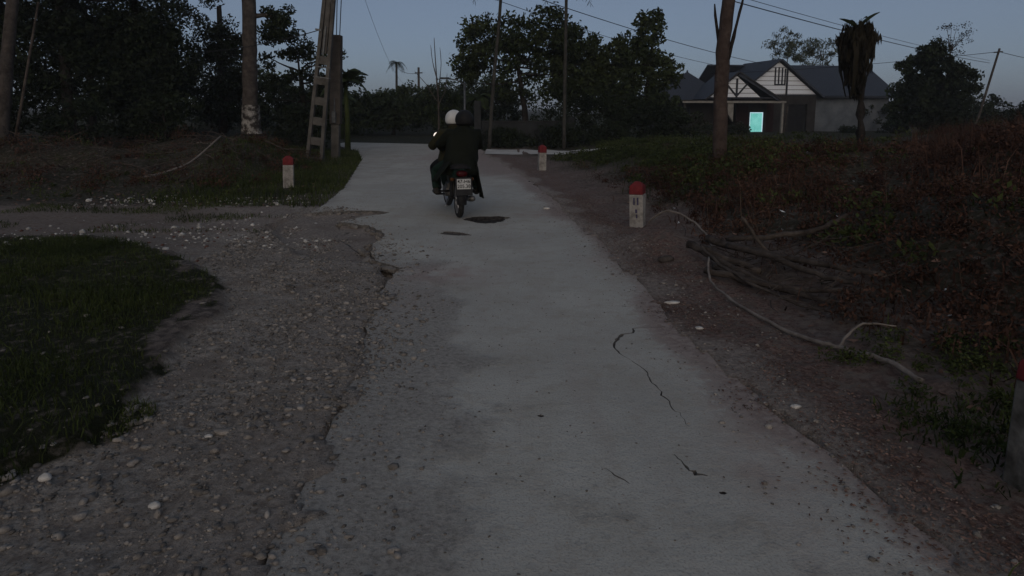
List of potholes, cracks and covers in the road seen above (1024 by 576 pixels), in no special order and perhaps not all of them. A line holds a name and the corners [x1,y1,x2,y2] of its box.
crack [613,327,686,424]
pothole [463,216,510,224]
crack [675,455,708,476]
